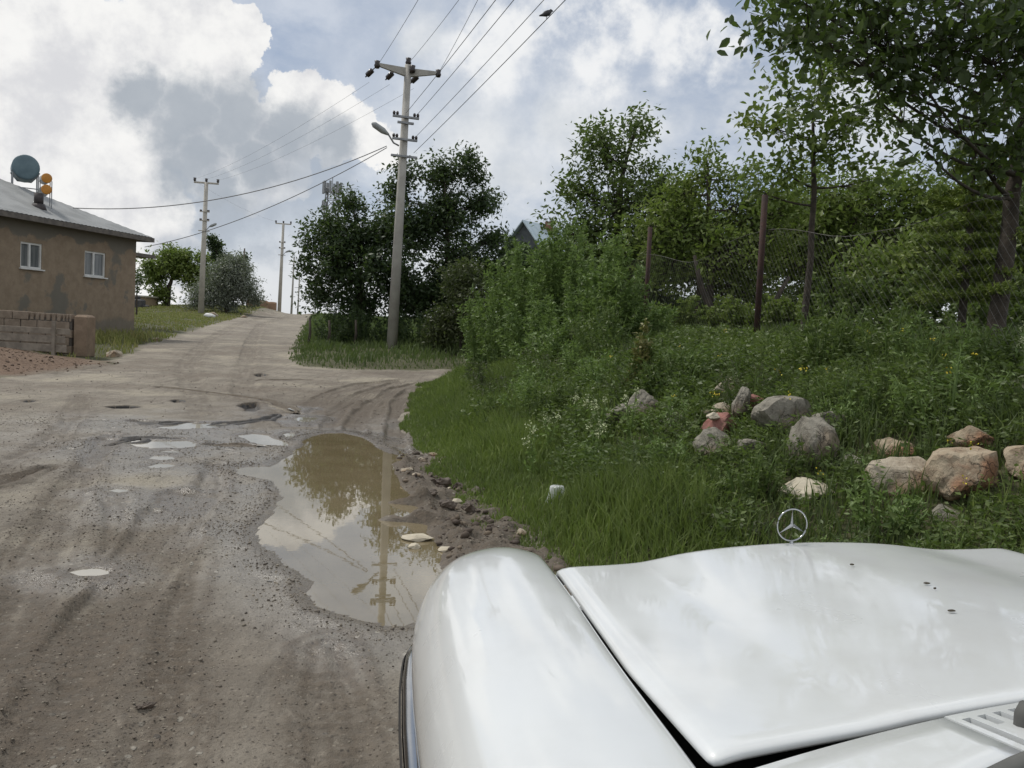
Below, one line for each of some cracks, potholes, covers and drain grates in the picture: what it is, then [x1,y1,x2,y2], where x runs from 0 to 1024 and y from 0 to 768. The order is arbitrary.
pothole [234,433,448,628]
pothole [69,568,109,576]
pothole [126,440,197,449]
pothole [238,402,261,412]
